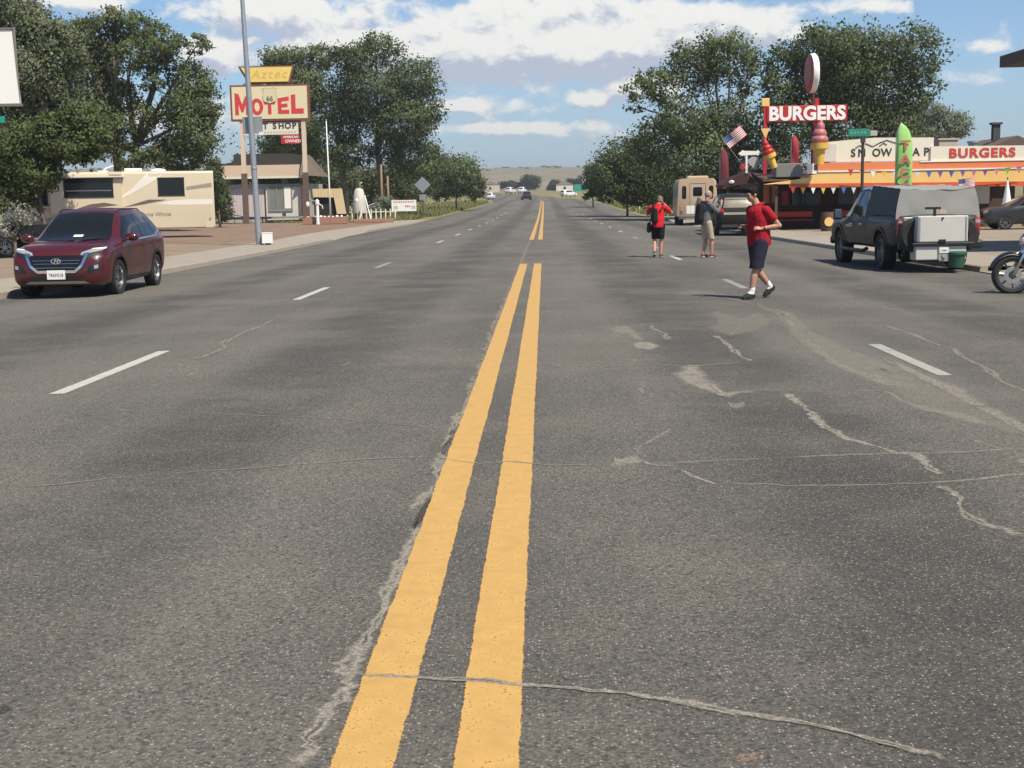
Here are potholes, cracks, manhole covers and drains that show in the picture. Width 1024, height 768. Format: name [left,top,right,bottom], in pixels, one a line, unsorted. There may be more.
crack [181,320,273,376]
crack [548,336,751,367]
crack [887,326,1024,391]
crack [53,457,574,485]
crack [637,389,1024,535]
crack [365,674,941,758]
